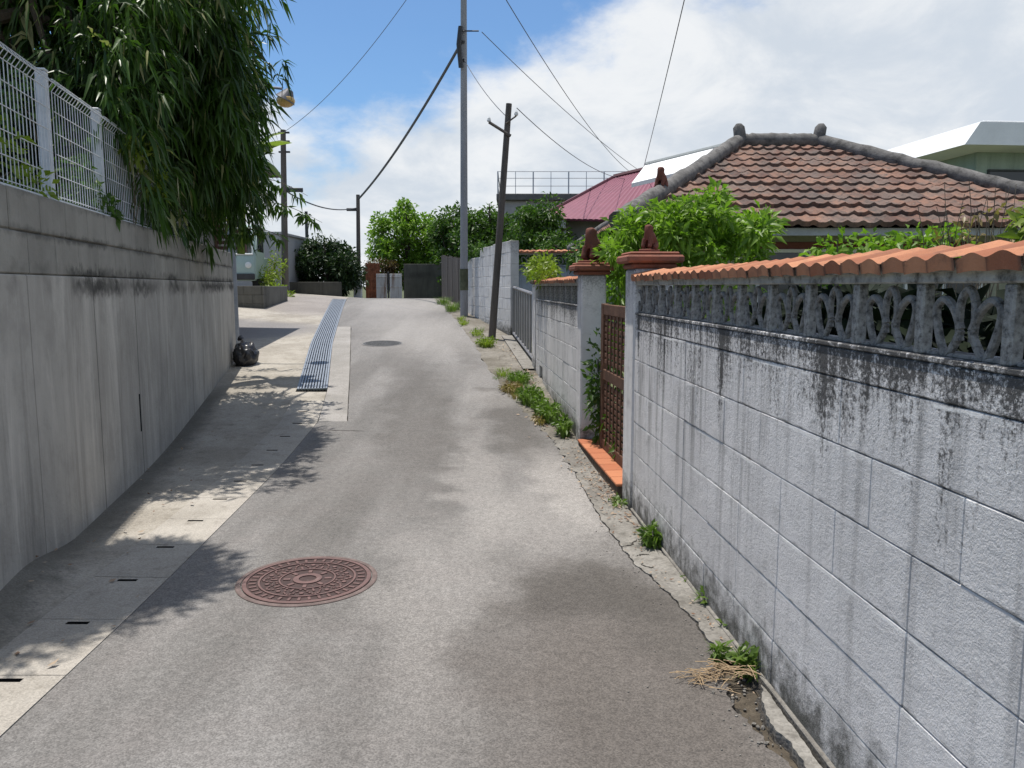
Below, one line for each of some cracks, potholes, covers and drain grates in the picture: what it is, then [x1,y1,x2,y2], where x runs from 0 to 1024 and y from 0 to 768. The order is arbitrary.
drain grate [309,340,333,350]
drain grate [305,350,332,361]
manhole cover [235,556,377,607]
drain grate [302,360,331,374]
drain grate [297,373,329,392]
drain grate [312,333,335,341]
